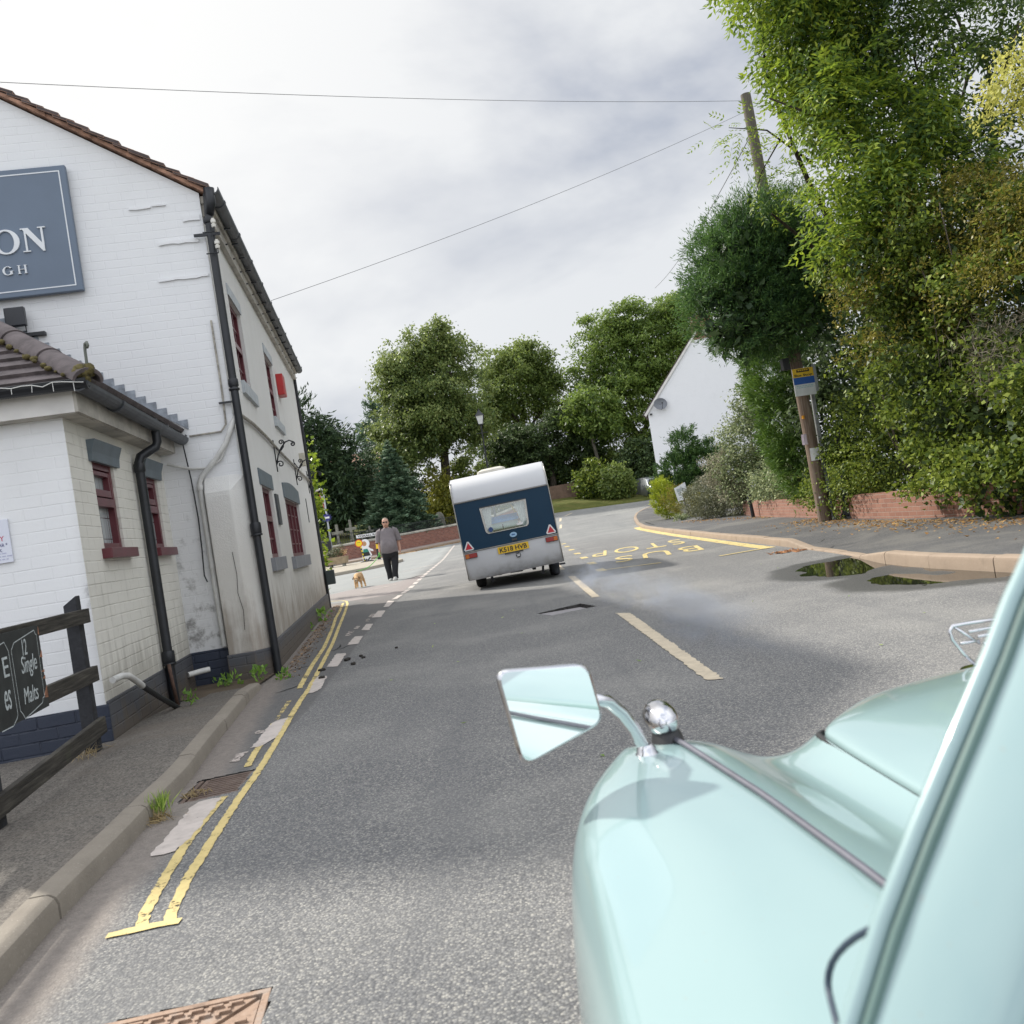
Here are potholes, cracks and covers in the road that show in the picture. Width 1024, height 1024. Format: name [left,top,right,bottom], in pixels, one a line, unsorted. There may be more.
drain grate [177,769,255,804]
manhole cover [107,987,273,1024]
